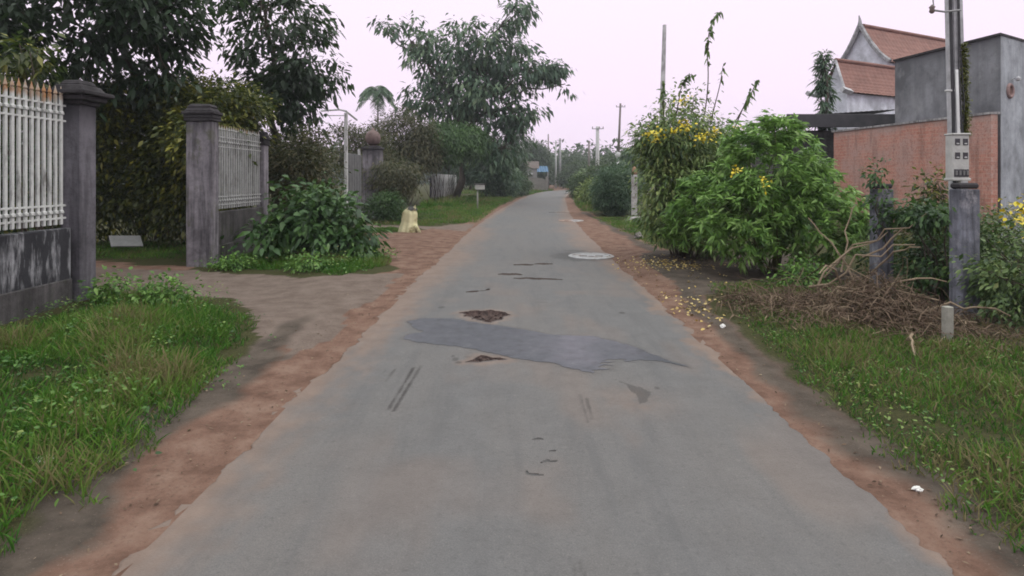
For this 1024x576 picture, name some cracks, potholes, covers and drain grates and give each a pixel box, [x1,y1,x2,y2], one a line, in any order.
crack [525,438,558,476]
pothole [466,355,508,363]
crack [467,263,563,293]
pothole [459,310,510,323]
